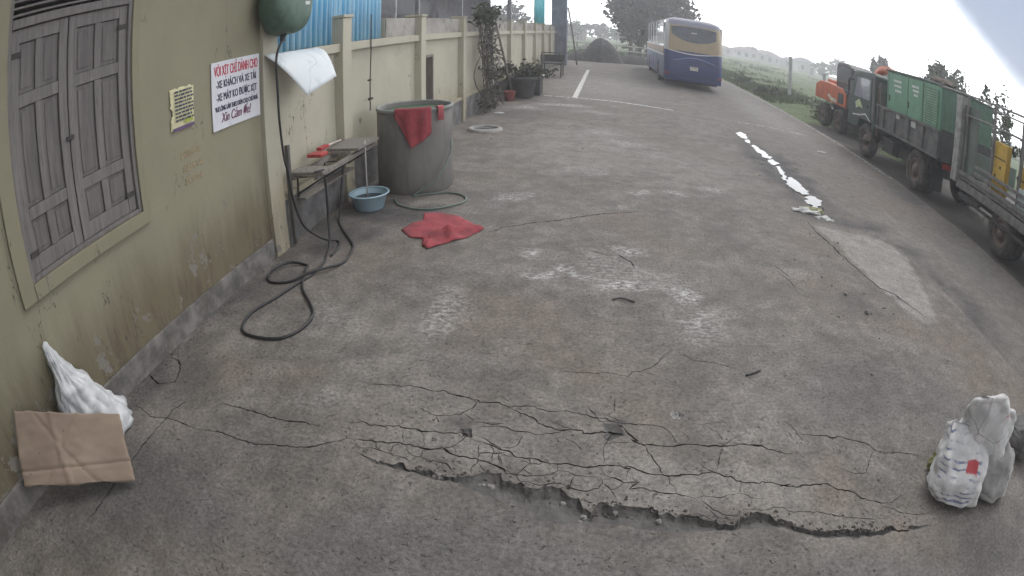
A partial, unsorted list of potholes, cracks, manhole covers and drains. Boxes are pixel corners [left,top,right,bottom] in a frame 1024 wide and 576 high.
crack [487,211,651,233]
crack [141,357,181,384]
crack [134,384,926,521]
